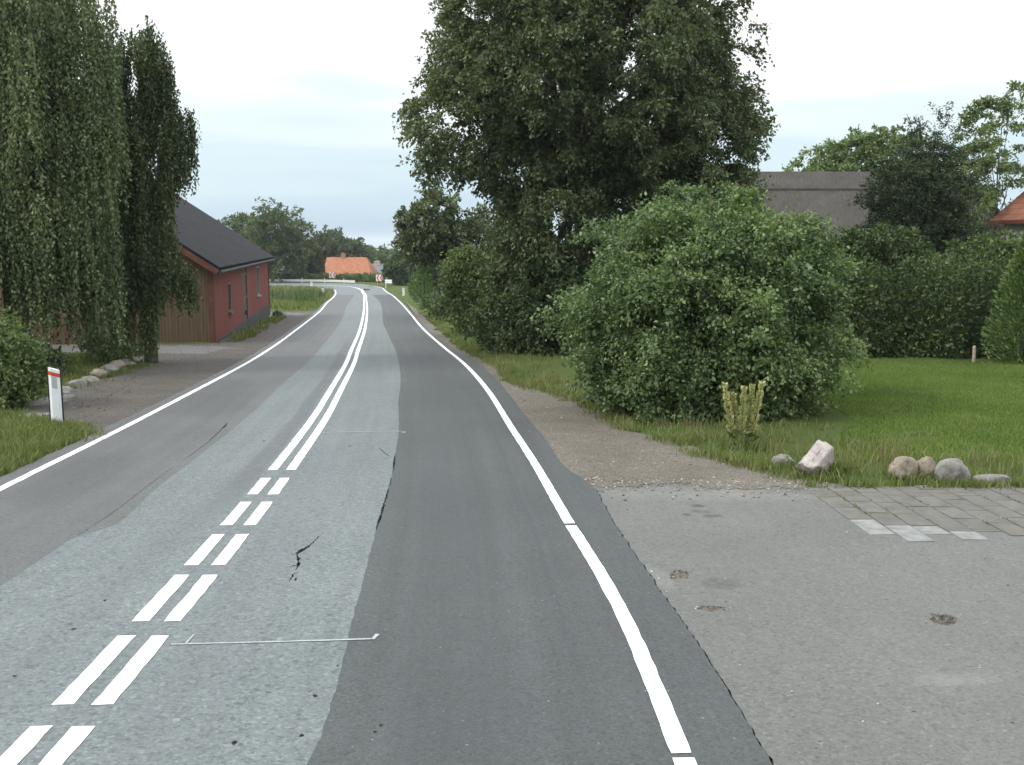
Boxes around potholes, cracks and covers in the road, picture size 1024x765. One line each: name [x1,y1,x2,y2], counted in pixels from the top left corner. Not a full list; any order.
pothole [670,570,689,580]
crack [290,533,323,581]
pothole [930,613,957,626]
